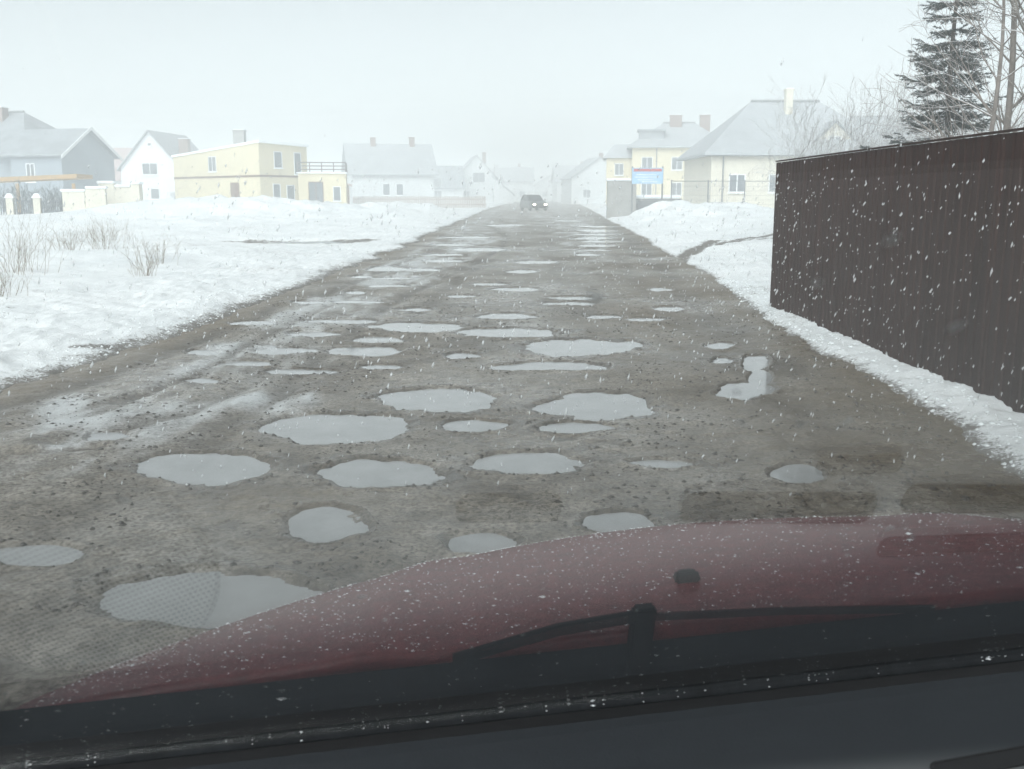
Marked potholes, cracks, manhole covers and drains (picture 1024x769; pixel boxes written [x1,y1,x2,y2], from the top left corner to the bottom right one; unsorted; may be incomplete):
pothole [320,344,413,357]
pothole [450,326,583,339]
pothole [277,500,379,545]
pothole [709,353,786,402]
pothole [358,320,470,333]
pothole [434,528,528,554]
pothole [359,383,515,414]
pothole [244,409,419,446]
pothole [452,446,600,475]
pothole [509,336,655,360]
pothole [762,458,831,485]
pothole [623,456,704,470]
